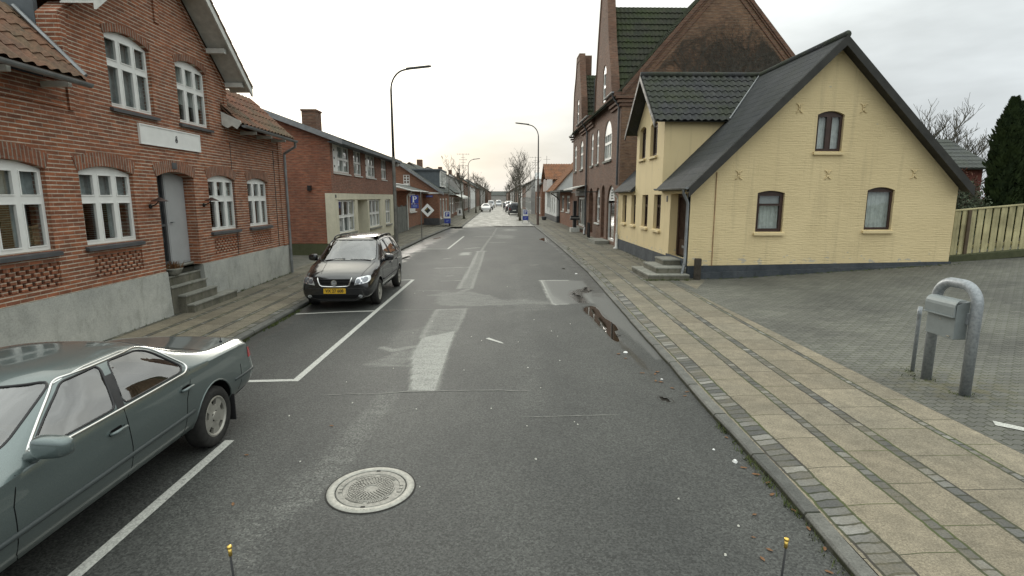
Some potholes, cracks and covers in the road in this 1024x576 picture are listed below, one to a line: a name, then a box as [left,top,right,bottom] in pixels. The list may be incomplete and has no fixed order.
manhole cover [325,467,416,514]
